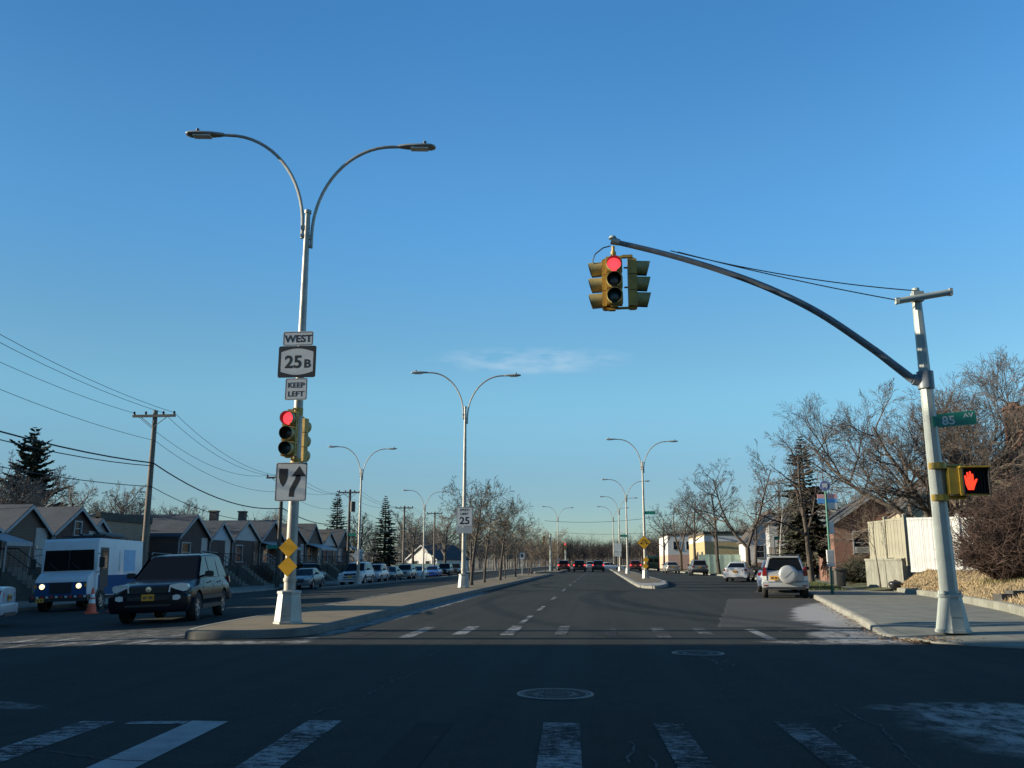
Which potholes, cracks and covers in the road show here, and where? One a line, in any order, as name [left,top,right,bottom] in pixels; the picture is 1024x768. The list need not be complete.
crack [625,740,658,768]
crack [833,704,922,768]
manhole cover [517,688,594,700]
